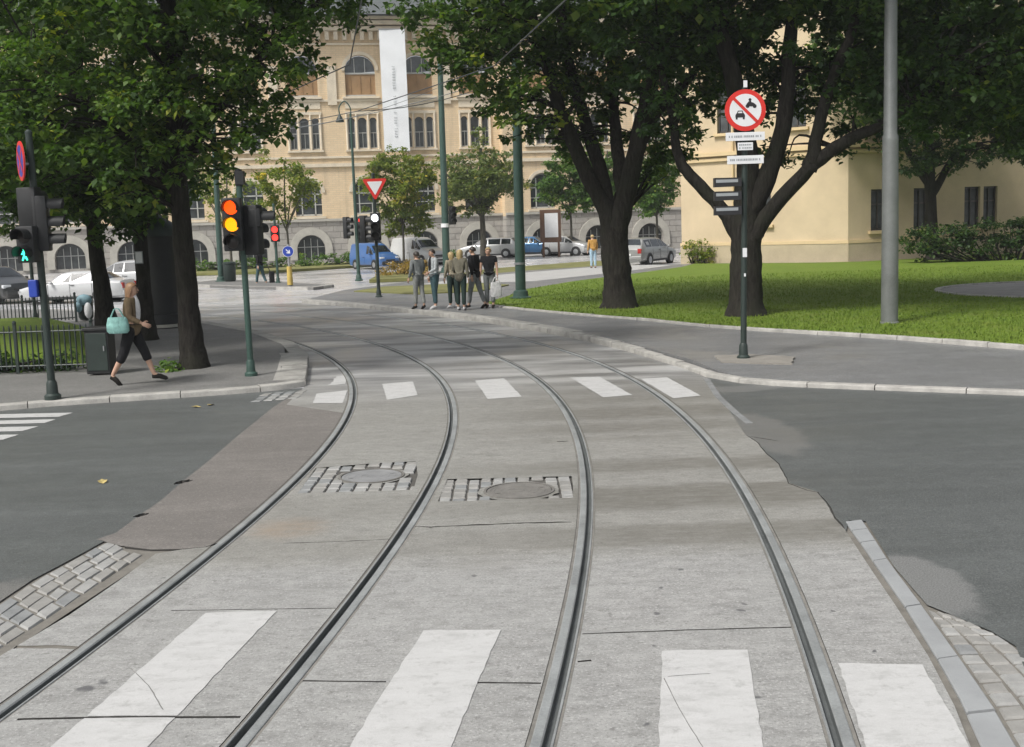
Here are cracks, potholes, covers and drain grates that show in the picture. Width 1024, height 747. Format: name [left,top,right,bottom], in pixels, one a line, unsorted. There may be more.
manhole cover [484,482,555,499]
manhole cover [338,468,405,485]
crack [17,668,241,723]
